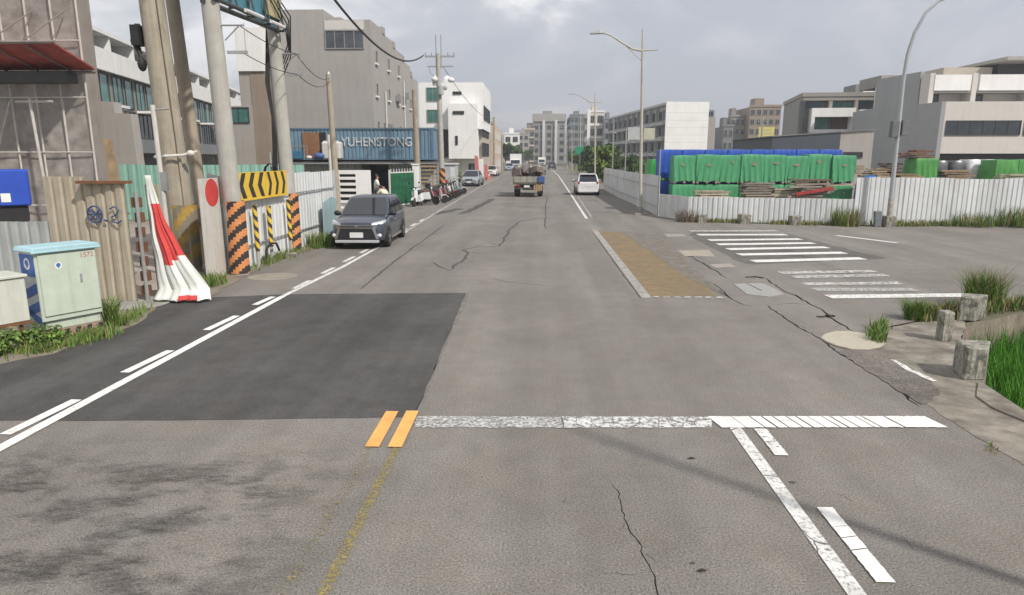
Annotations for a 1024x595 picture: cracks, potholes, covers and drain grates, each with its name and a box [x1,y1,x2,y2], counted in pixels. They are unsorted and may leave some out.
crack [606,481,659,595]
crack [765,278,918,406]
manhole cover [734,283,783,297]
